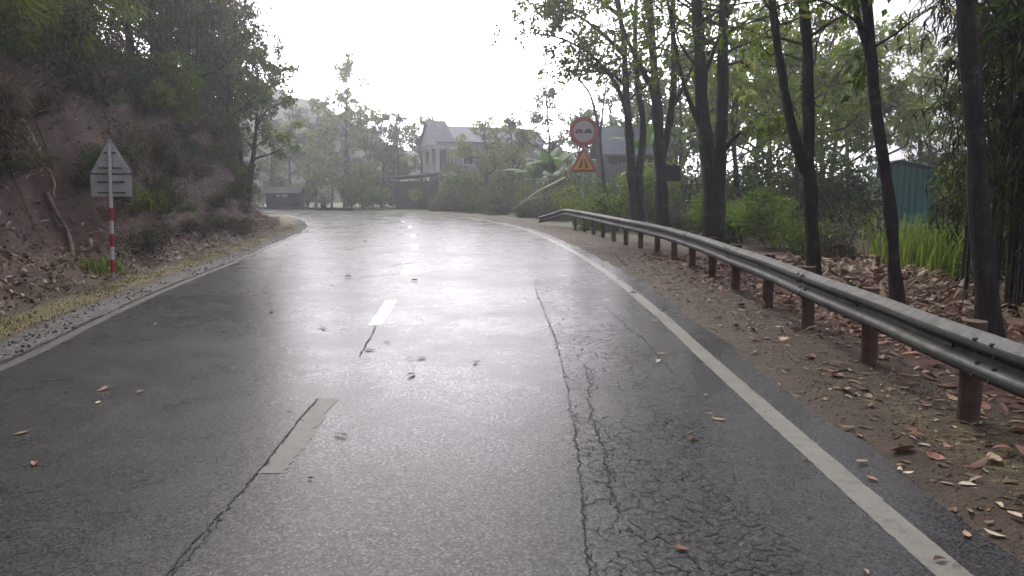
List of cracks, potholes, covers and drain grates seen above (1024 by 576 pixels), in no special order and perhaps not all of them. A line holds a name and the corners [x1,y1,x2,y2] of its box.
crack [535,277,805,576]
crack [164,398,318,576]
